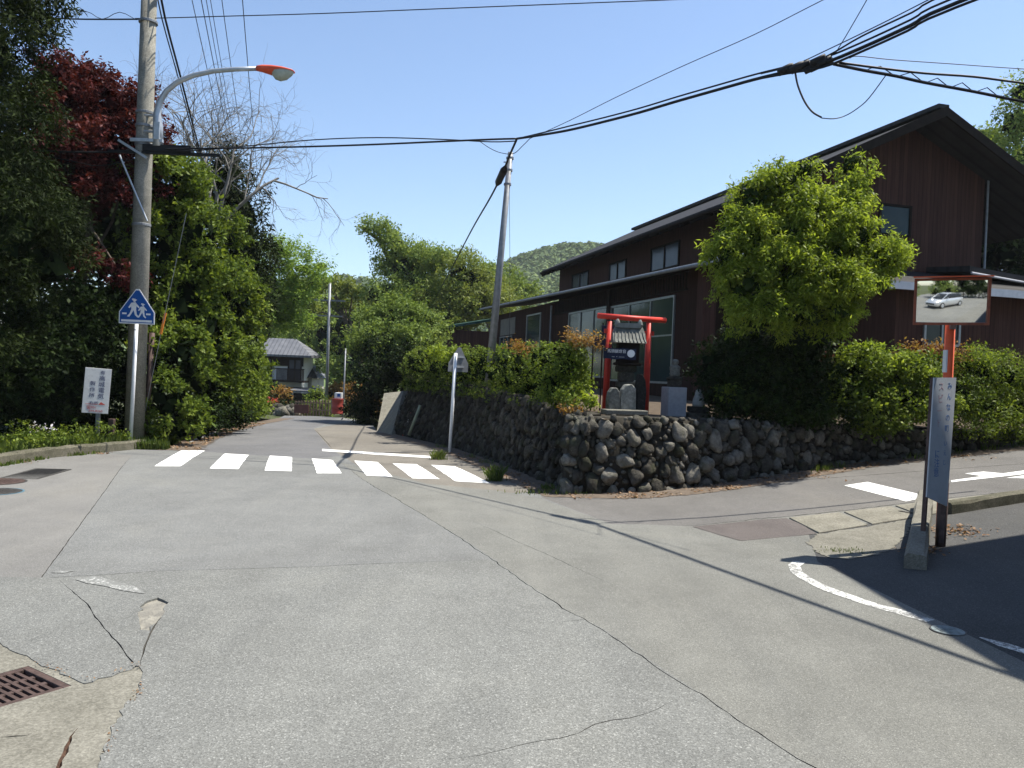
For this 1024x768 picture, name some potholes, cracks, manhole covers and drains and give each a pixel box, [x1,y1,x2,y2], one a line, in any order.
crack [64,584,161,665]
drain grate [0,666,70,707]
crack [354,473,816,768]
crack [56,728,78,768]
pothole [138,600,167,631]
